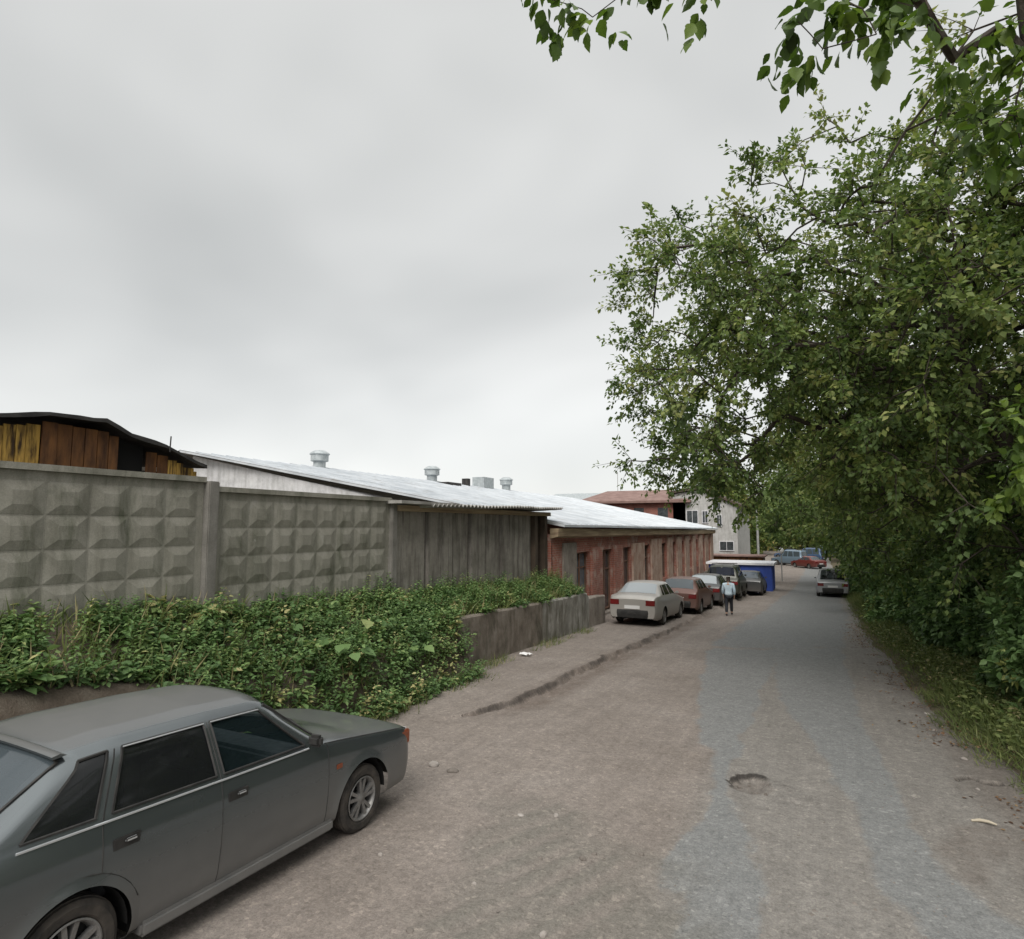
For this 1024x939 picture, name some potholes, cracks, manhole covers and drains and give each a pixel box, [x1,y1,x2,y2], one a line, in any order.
pothole [724,772,778,797]
